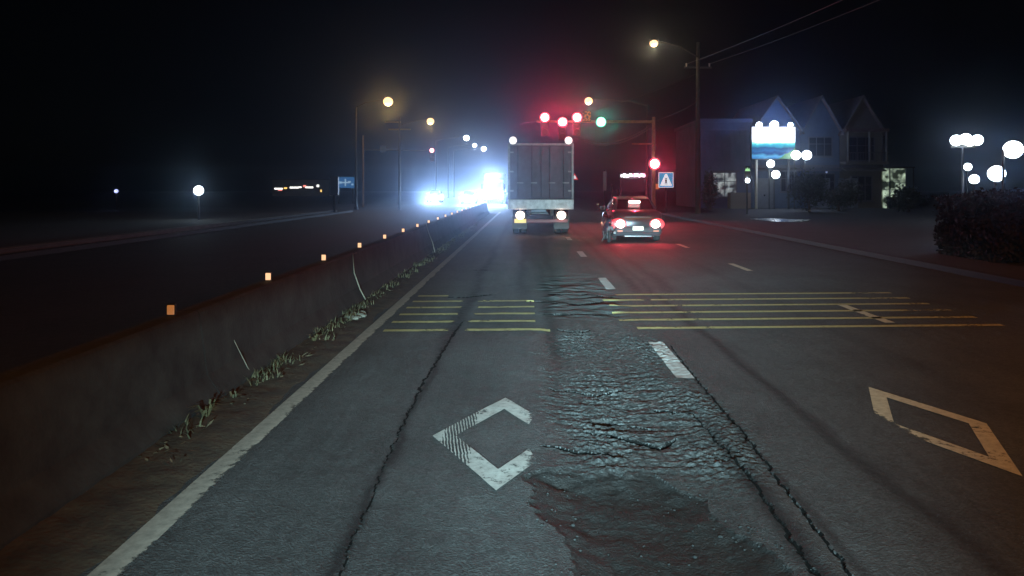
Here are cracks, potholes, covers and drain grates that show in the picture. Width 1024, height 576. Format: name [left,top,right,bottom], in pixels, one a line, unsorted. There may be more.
crack [542,346,852,576]
crack [530,294,614,333]
crack [339,322,463,576]
pothole [509,464,816,576]
